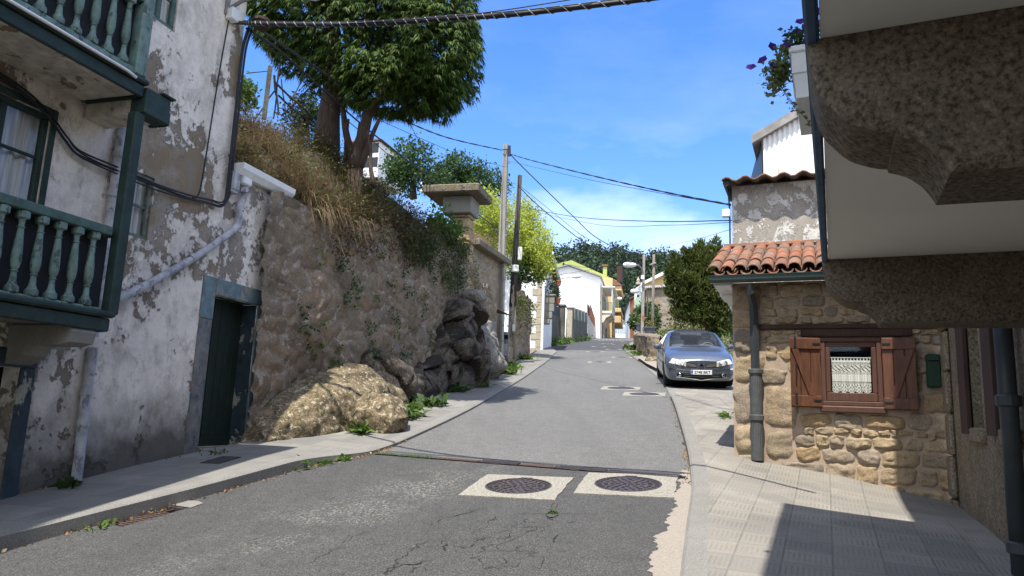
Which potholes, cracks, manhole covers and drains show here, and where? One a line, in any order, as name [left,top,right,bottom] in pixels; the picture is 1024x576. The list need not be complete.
manhole cover [574,472,678,498]
drain grate [110,500,202,527]
crack [384,509,595,574]
manhole cover [458,474,574,501]
